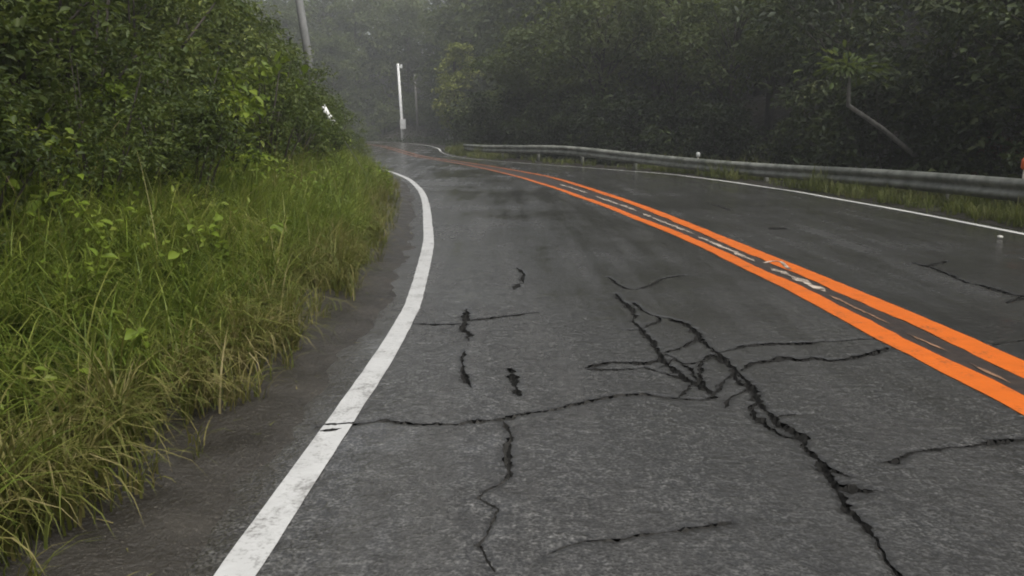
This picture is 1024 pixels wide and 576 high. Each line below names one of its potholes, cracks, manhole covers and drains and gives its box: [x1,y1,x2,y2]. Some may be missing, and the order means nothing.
crack [915,261,1024,303]
crack [315,275,1024,576]
crack [512,270,526,290]
